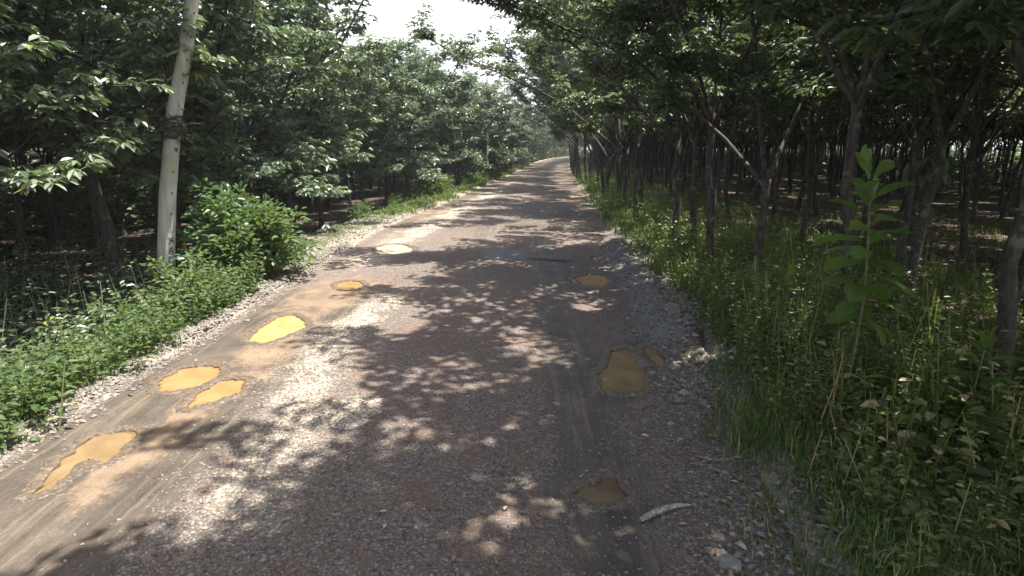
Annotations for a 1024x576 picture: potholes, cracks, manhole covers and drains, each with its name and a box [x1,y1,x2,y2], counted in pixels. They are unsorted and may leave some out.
pothole [559,469,644,513]
pothole [239,312,315,346]
pothole [146,362,231,395]
pothole [13,424,151,503]
pothole [568,273,614,288]
pothole [588,345,656,397]
pothole [371,243,417,255]
pothole [330,279,371,291]
pothole [175,375,256,413]
